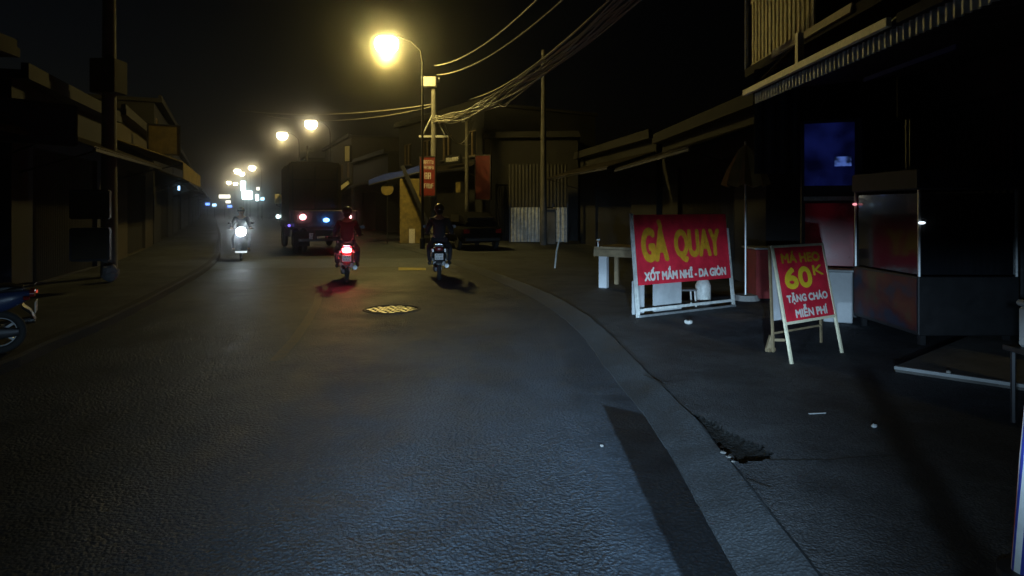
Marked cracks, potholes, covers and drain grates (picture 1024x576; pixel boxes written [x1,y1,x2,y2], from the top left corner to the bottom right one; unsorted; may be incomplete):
pothole [693,413,774,464]
manhole cover [362,305,421,314]
